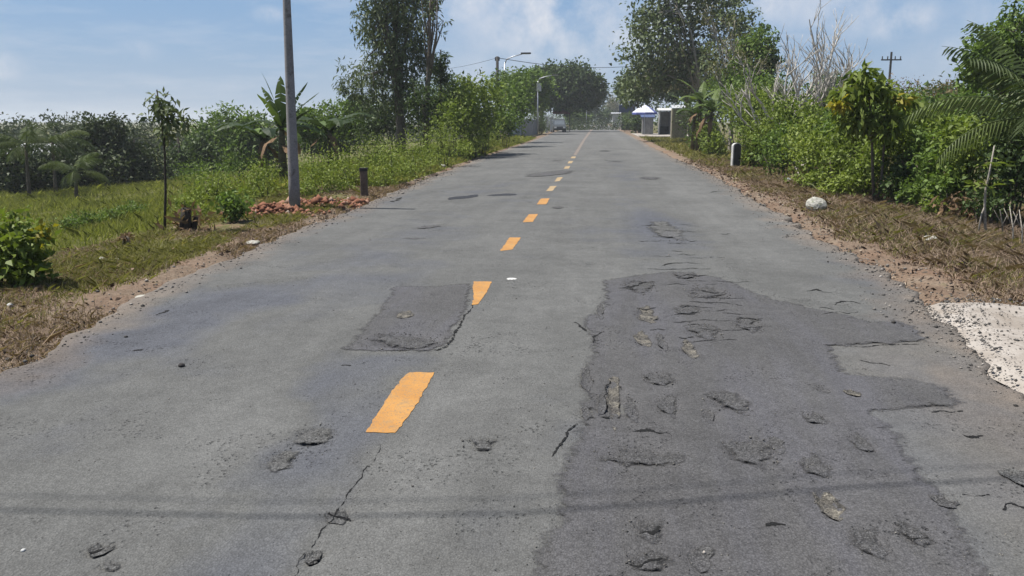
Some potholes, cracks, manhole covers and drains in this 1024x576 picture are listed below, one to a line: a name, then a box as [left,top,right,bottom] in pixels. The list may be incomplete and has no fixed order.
pothole [646,221,686,241]
pothole [265,451,299,472]
crack [552,424,576,456]
pothole [705,391,749,414]
pothole [472,436,496,449]
pothole [721,439,772,470]
pothole [812,492,845,521]
pothole [292,428,331,443]
pothole [606,376,620,431]
pothole [87,542,114,557]
